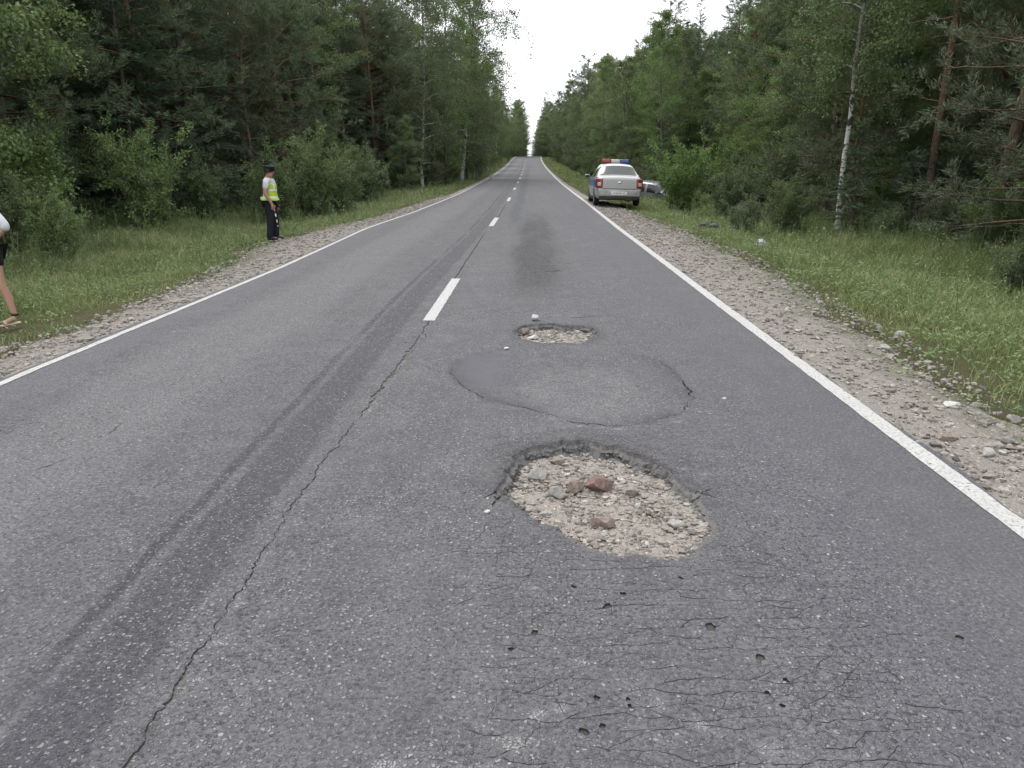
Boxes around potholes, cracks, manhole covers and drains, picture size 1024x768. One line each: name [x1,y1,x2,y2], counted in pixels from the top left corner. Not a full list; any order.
pothole [481,319,617,345]
pothole [463,432,778,595]
crack [122,320,430,768]
